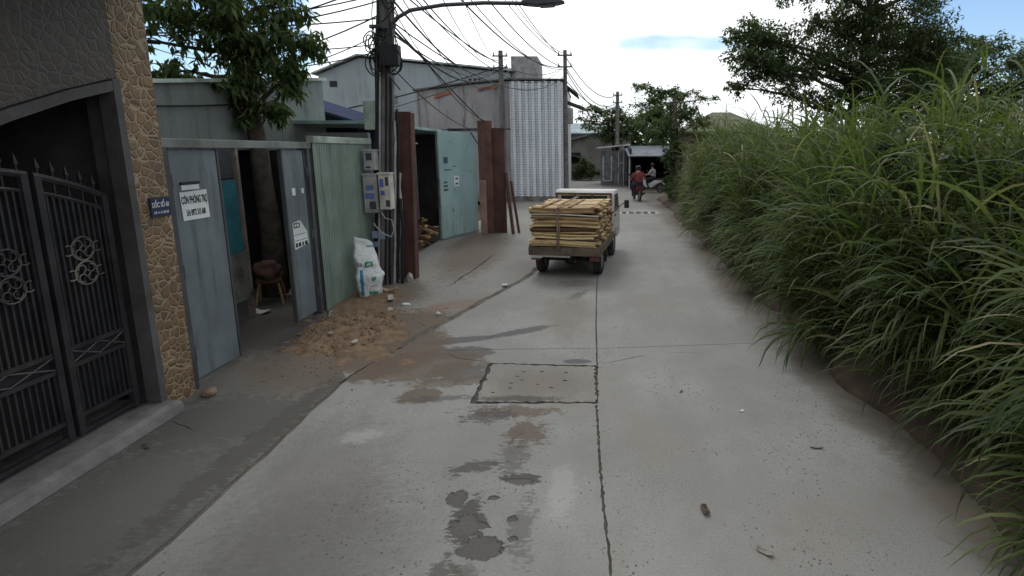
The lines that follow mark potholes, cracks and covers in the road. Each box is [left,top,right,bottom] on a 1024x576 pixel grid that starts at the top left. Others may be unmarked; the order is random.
crack [437,253,496,288]
manhole cover [470,363,599,404]
